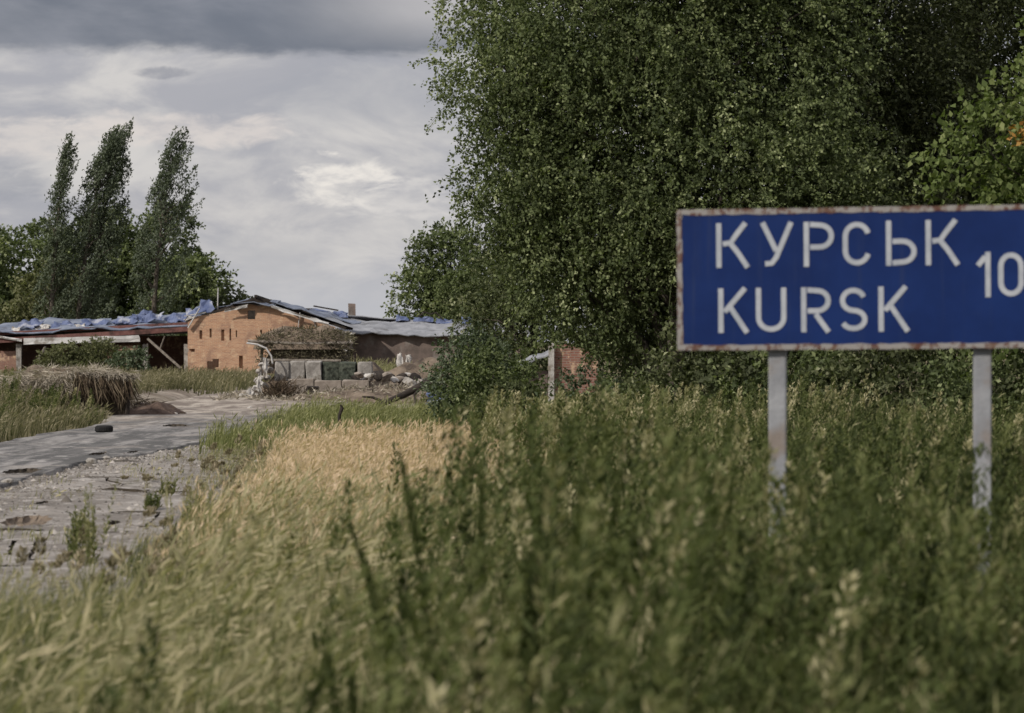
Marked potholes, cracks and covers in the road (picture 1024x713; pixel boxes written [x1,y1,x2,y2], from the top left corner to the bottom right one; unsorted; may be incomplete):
pothole [0,515,59,527]
crack [90,460,140,485]
